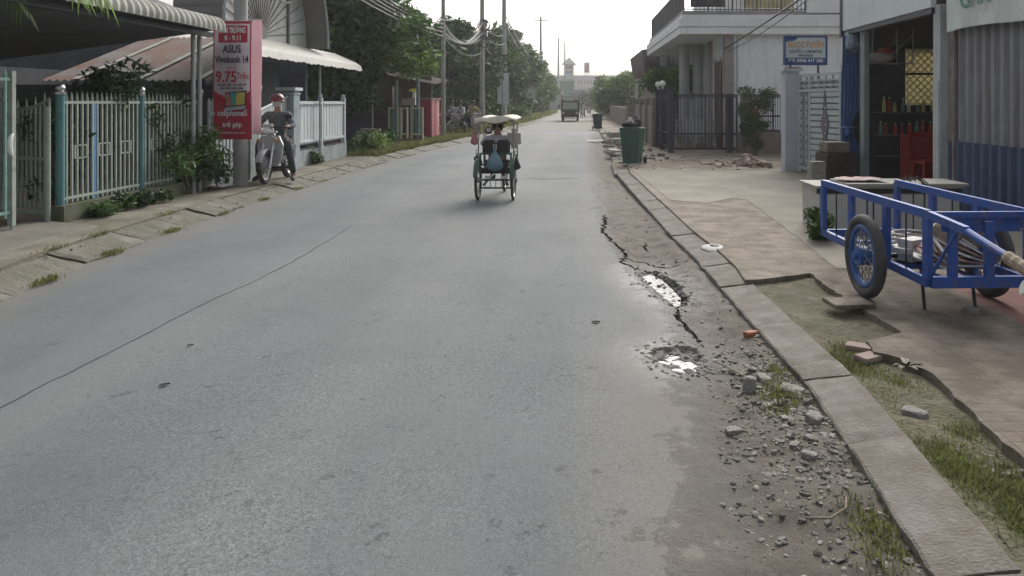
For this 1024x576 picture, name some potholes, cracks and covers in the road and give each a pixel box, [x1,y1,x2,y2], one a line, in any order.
pothole [637,270,690,308]
crack [600,215,688,271]
pothole [647,345,712,375]
crack [673,308,704,348]
